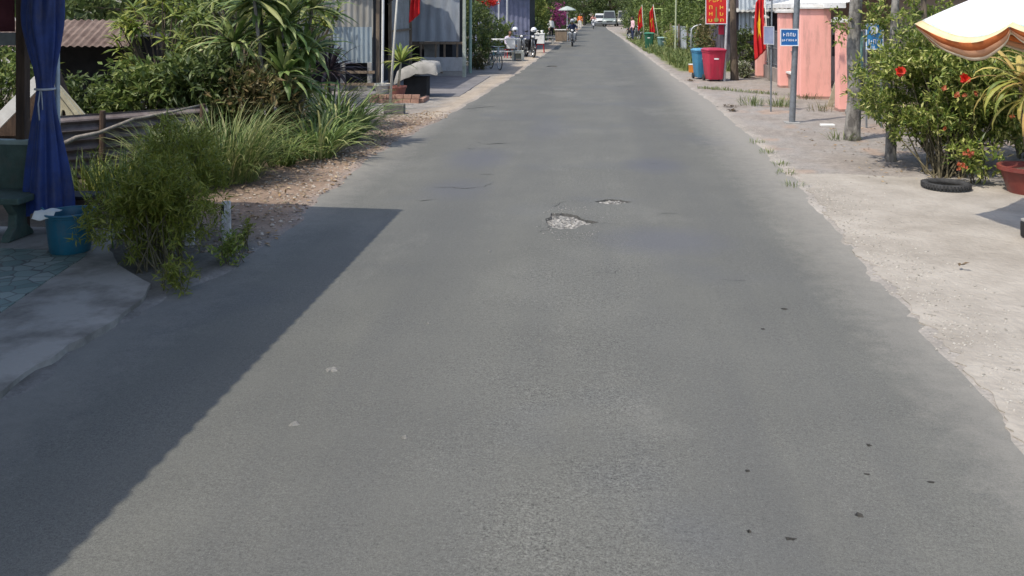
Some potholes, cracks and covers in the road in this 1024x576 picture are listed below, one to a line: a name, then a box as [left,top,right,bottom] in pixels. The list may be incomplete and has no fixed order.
pothole [536,206,603,240]
